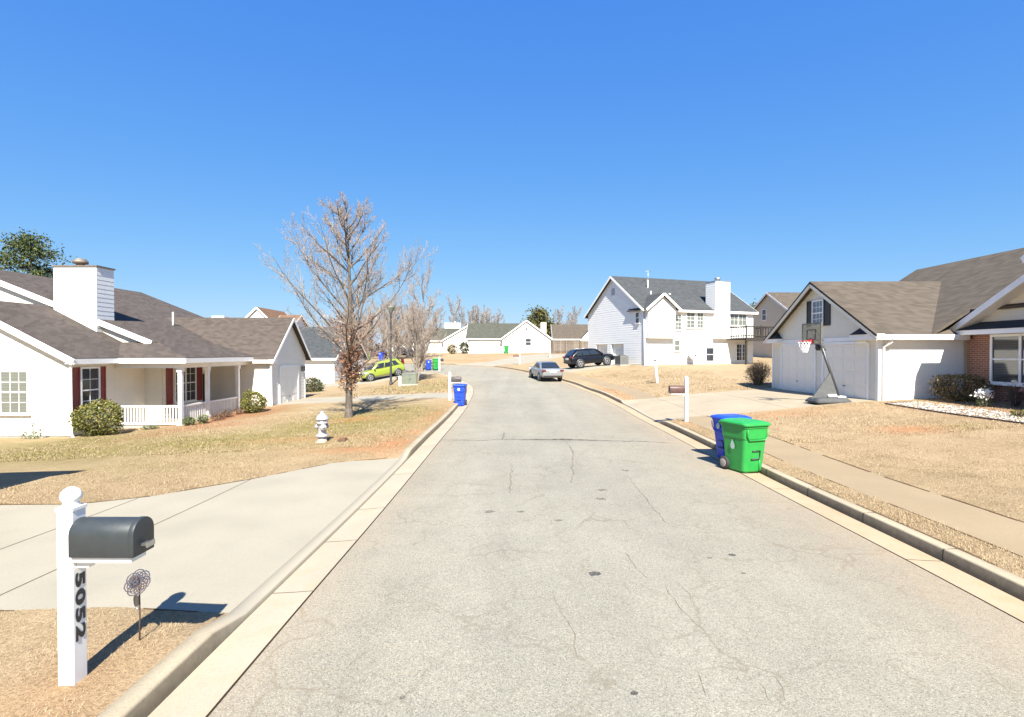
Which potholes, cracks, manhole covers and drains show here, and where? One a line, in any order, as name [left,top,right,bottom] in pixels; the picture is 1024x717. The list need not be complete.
crack [477,433,664,483]
crack [553,593,578,657]
crack [665,584,702,629]
